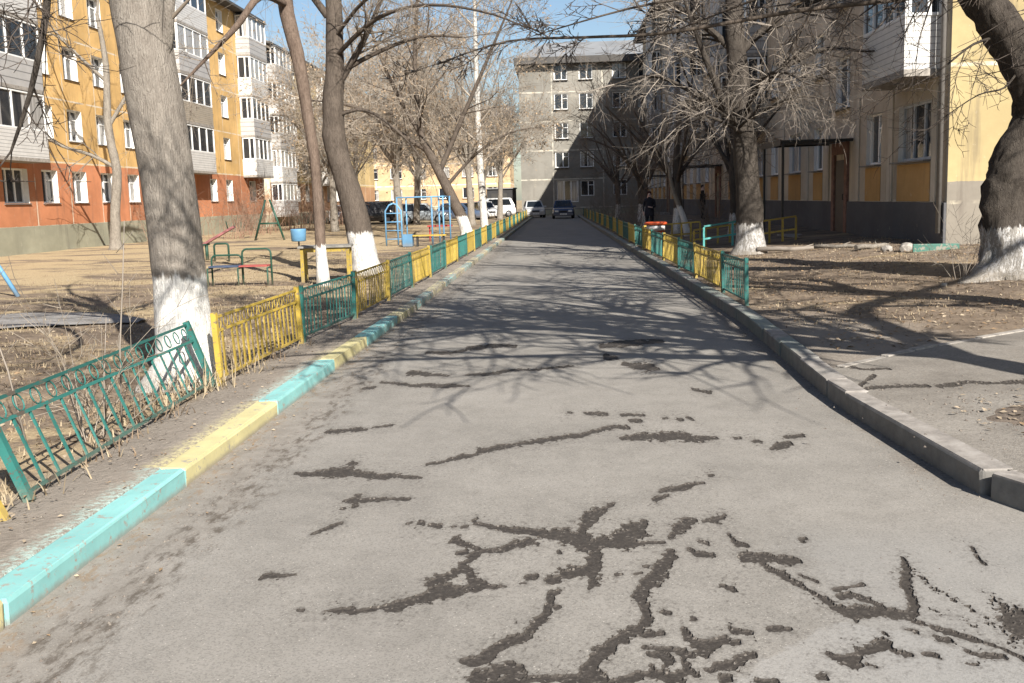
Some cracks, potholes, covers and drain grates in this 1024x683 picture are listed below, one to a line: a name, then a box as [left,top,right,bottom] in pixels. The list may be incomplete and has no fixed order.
crack [258,571,297,580]
crack [839,365,1024,390]
crack [294,411,1024,683]
